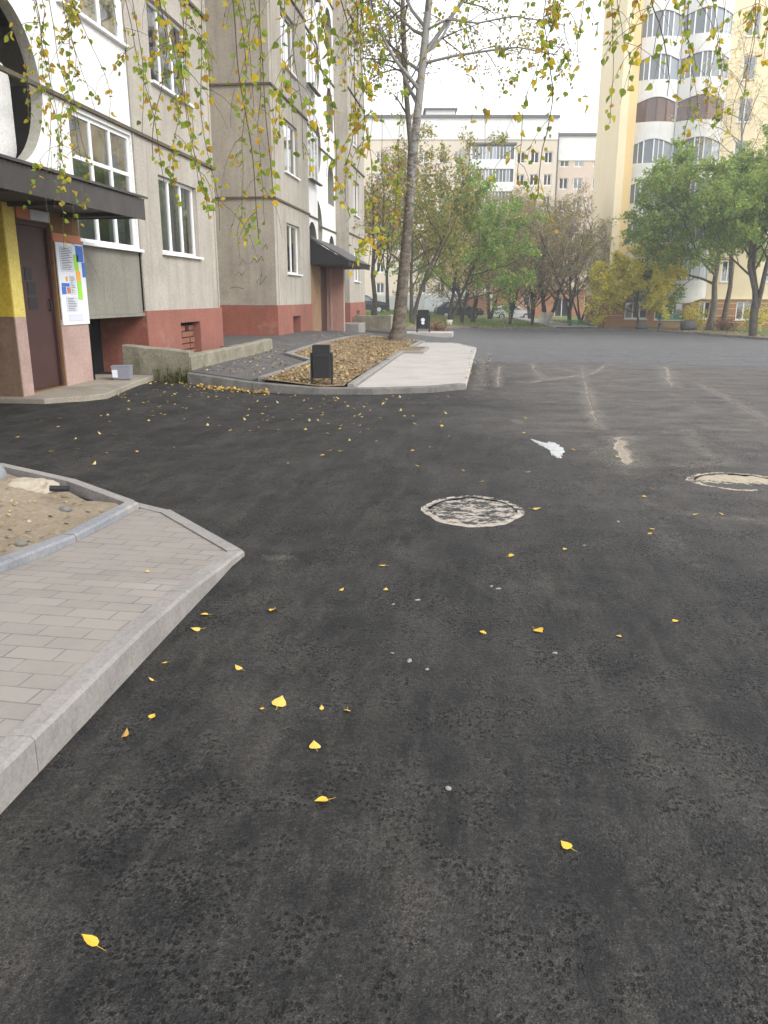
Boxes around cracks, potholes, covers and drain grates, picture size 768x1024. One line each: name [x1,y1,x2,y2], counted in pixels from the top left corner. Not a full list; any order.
manhole cover [686,472,768,491]
manhole cover [421,495,525,527]
